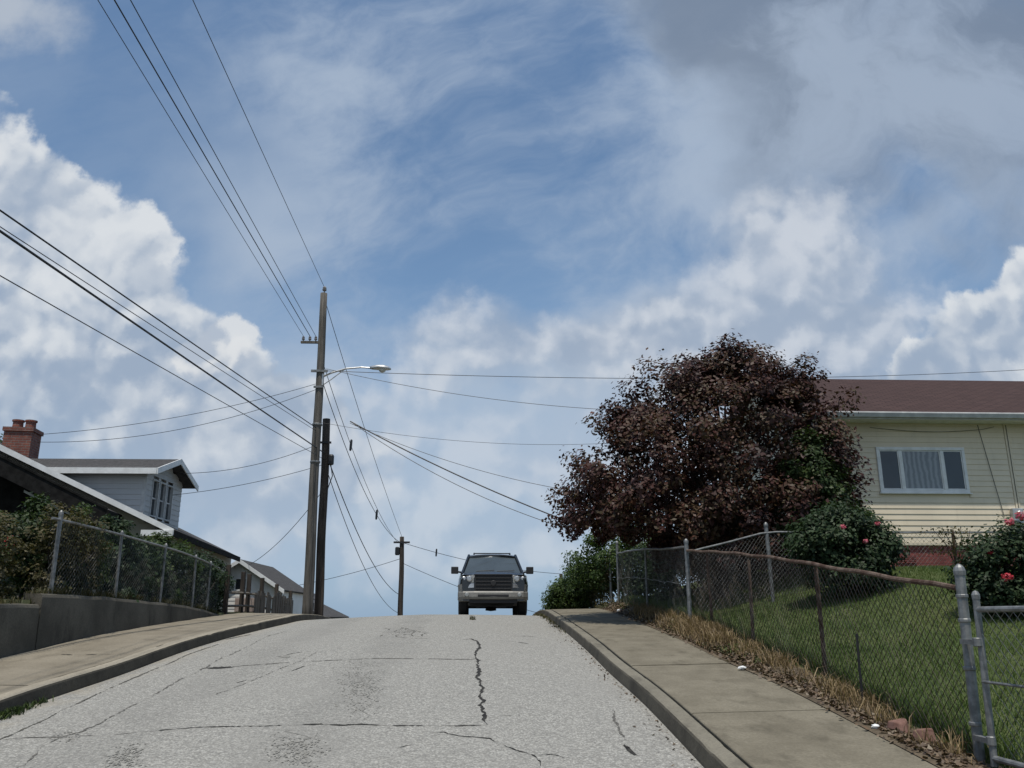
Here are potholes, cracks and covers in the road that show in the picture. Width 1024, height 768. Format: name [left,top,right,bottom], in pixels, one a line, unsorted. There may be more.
crack [612,709,625,737]
crack [11,631,562,768]
